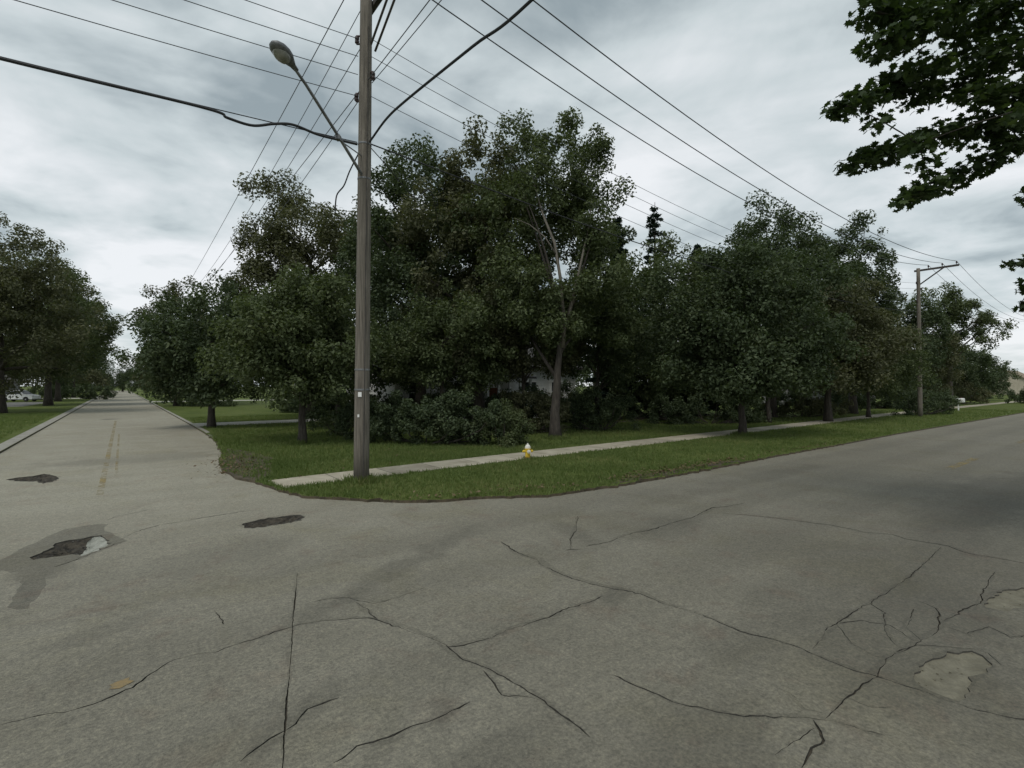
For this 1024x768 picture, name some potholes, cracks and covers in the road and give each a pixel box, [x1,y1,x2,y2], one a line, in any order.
pothole [242,515,305,528]
pothole [30,535,111,560]
crack [501,505,1024,767]
crack [1,588,600,763]
pothole [6,474,59,484]
